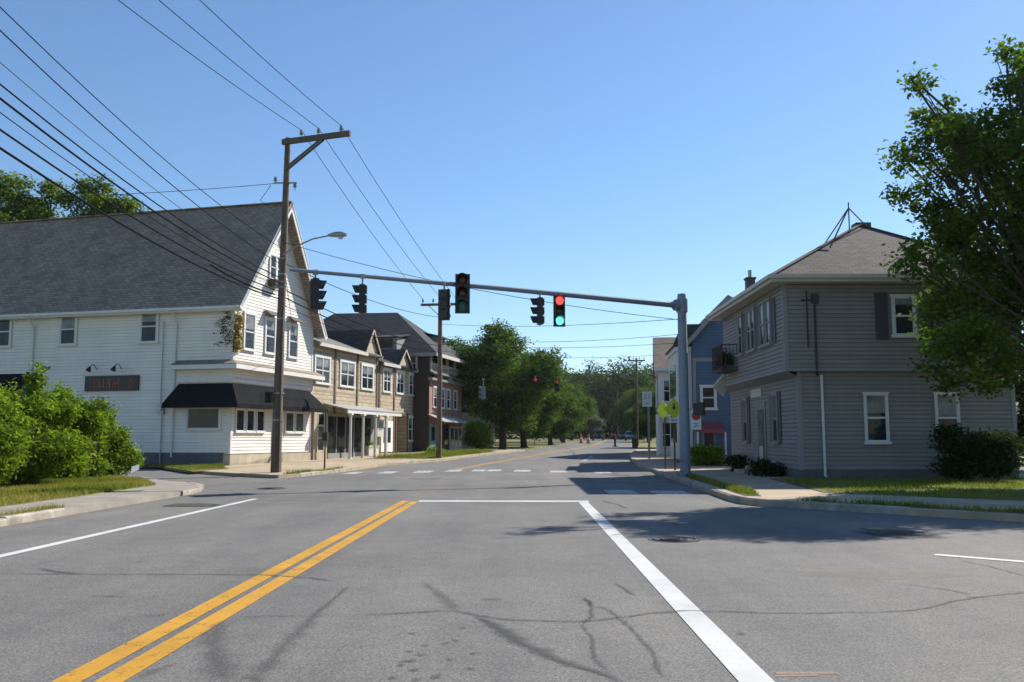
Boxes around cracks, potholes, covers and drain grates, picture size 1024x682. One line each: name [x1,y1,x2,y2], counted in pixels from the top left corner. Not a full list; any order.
crack [387,584,1019,678]
